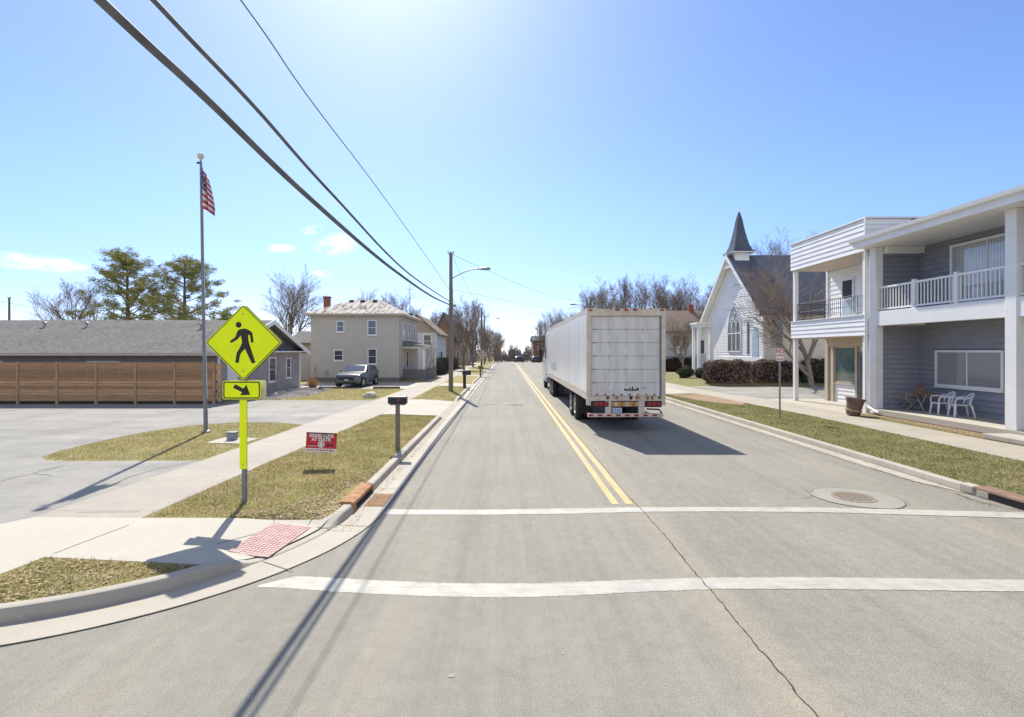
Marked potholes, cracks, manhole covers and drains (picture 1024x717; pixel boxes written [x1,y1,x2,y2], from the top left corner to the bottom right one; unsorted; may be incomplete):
manhole cover [810,488,906,509]
crack [631,499,819,717]
drain grate [339,482,393,512]
